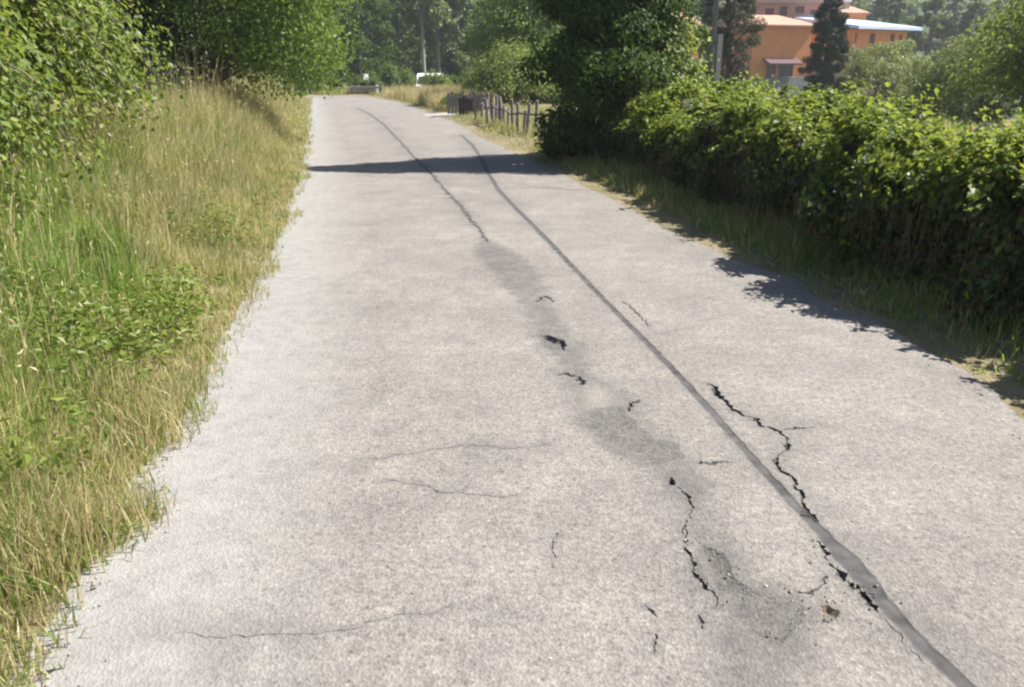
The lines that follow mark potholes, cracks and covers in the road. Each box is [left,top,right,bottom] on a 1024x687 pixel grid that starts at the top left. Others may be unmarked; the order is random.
crack [383,479,514,498]
crack [707,383,819,522]
crack [676,486,718,629]
crack [180,606,450,638]
crack [557,372,587,385]
crack [367,444,549,461]
